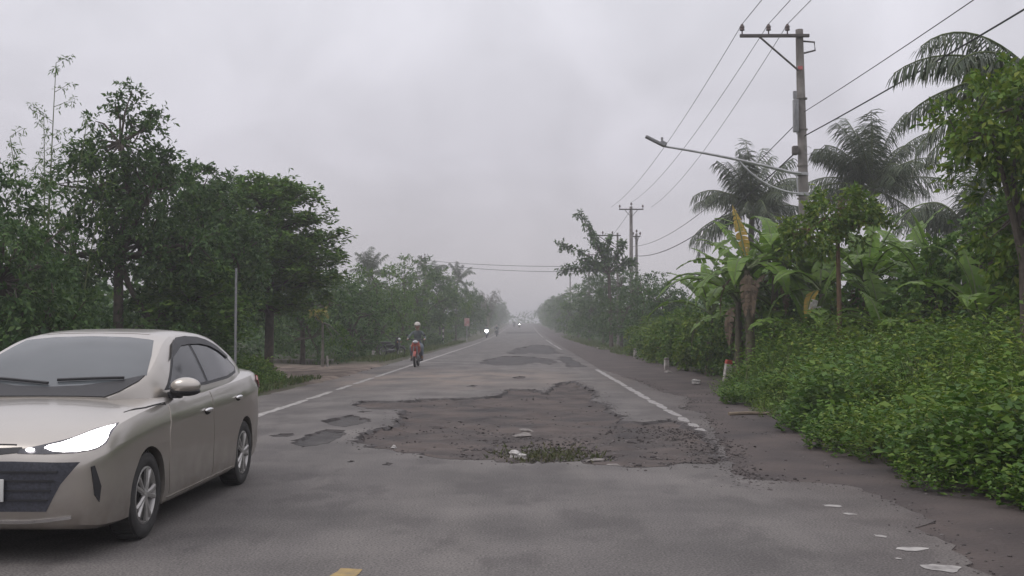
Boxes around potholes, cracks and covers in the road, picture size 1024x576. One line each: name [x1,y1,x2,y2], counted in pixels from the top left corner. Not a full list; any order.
pothole [556,356,587,367]
pothole [507,345,564,355]
pothole [480,355,557,365]
pothole [349,381,727,468]
pothole [321,415,372,427]
pothole [290,429,346,447]
